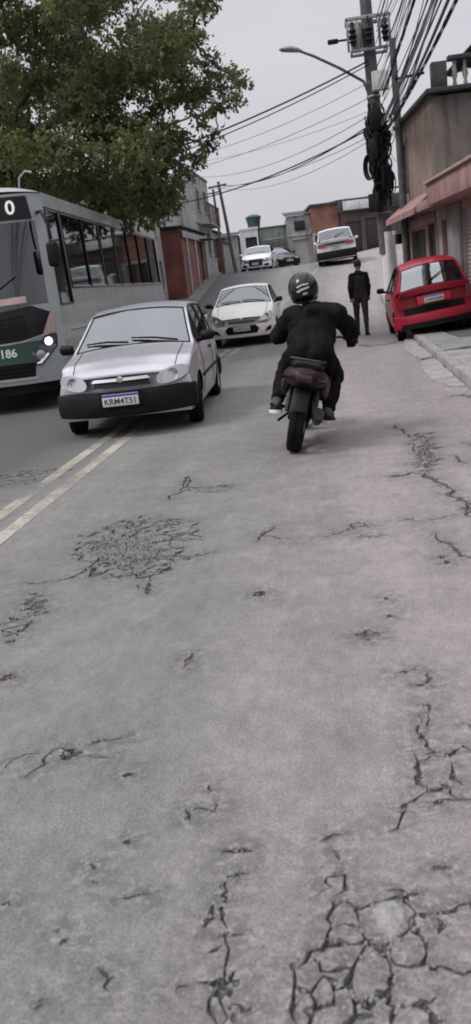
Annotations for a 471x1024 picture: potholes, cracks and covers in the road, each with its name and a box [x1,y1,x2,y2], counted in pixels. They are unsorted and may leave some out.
crack [0,468,71,487]
crack [167,476,236,501]
crack [322,523,381,538]
crack [288,834,471,1024]
crack [175,872,252,1024]
crack [390,426,471,564]
crack [0,515,218,644]
crack [1,735,135,778]
crack [387,669,471,832]
